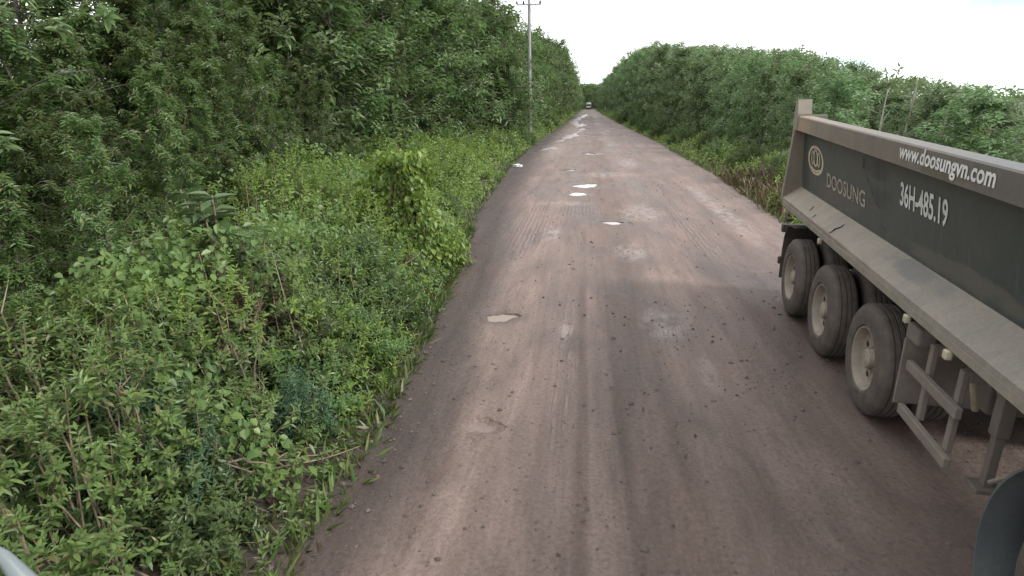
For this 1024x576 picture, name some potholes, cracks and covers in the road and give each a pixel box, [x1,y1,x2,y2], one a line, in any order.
pothole [445,414,519,438]
pothole [478,312,529,324]
